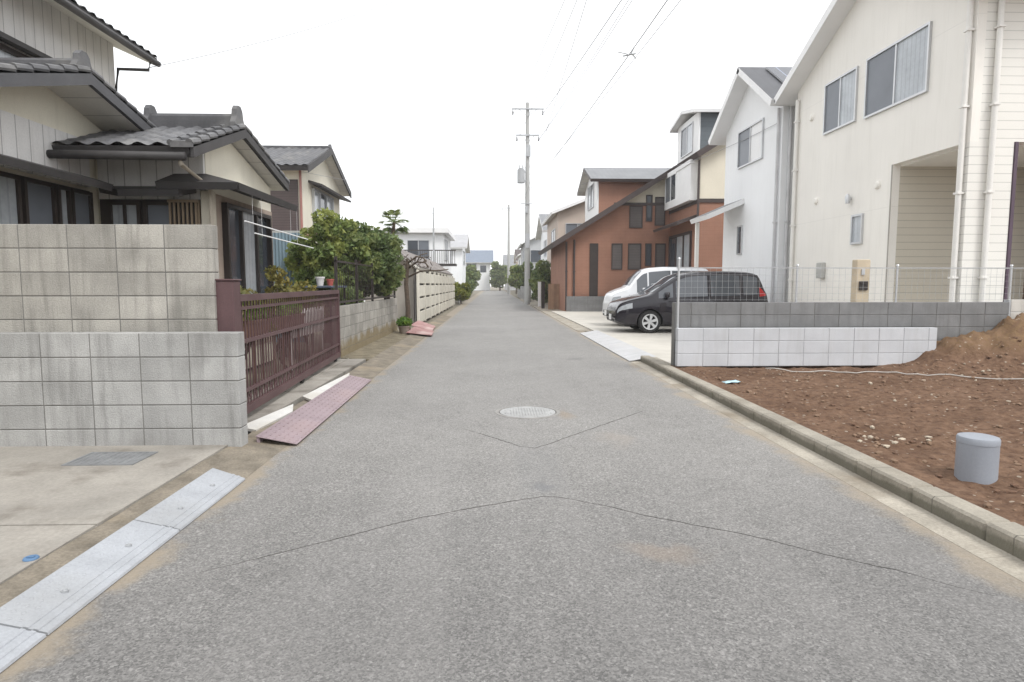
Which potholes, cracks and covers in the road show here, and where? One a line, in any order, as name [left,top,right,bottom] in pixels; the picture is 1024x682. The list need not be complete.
manhole cover [495,405,560,419]
